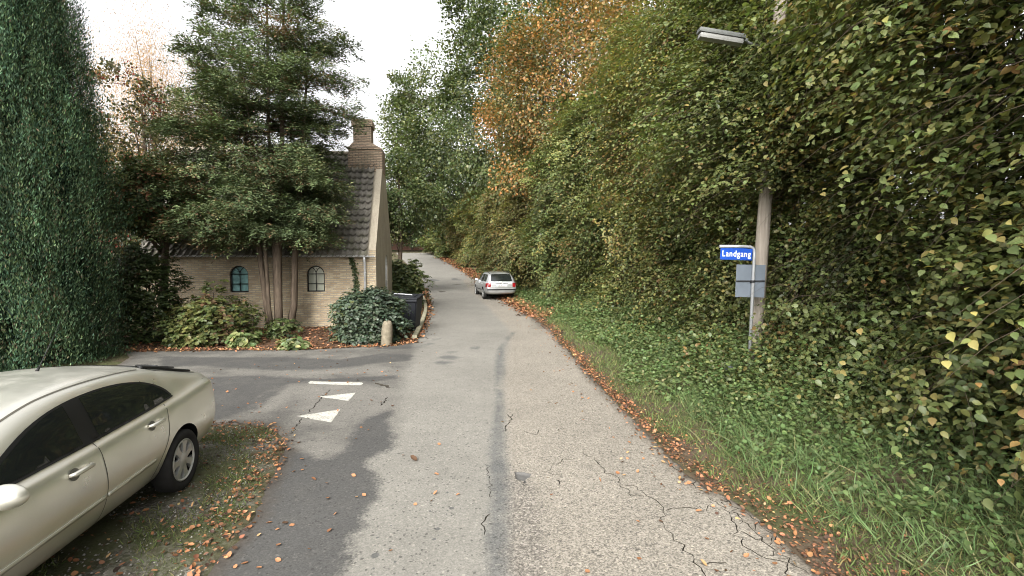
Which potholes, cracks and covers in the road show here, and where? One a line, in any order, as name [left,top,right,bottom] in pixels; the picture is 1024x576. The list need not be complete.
pothole [514,472,531,483]
crack [537,453,804,576]
